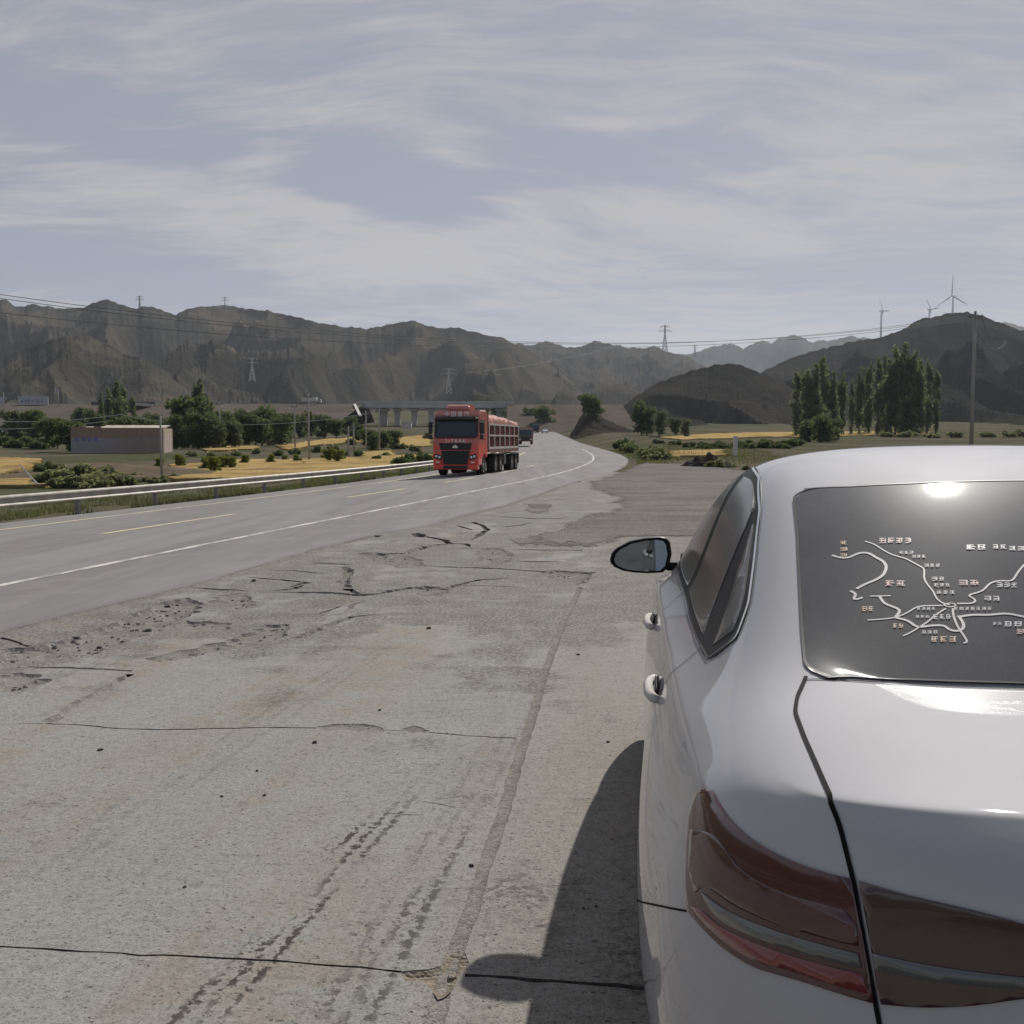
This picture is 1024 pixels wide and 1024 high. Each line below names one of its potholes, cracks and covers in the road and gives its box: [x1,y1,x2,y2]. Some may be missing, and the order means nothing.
pothole [207,593,256,609]
pothole [0,598,204,669]
pothole [0,673,52,696]
crack [202,563,409,643]
pothole [175,621,231,632]
pothole [145,624,290,662]
crack [382,501,585,588]
